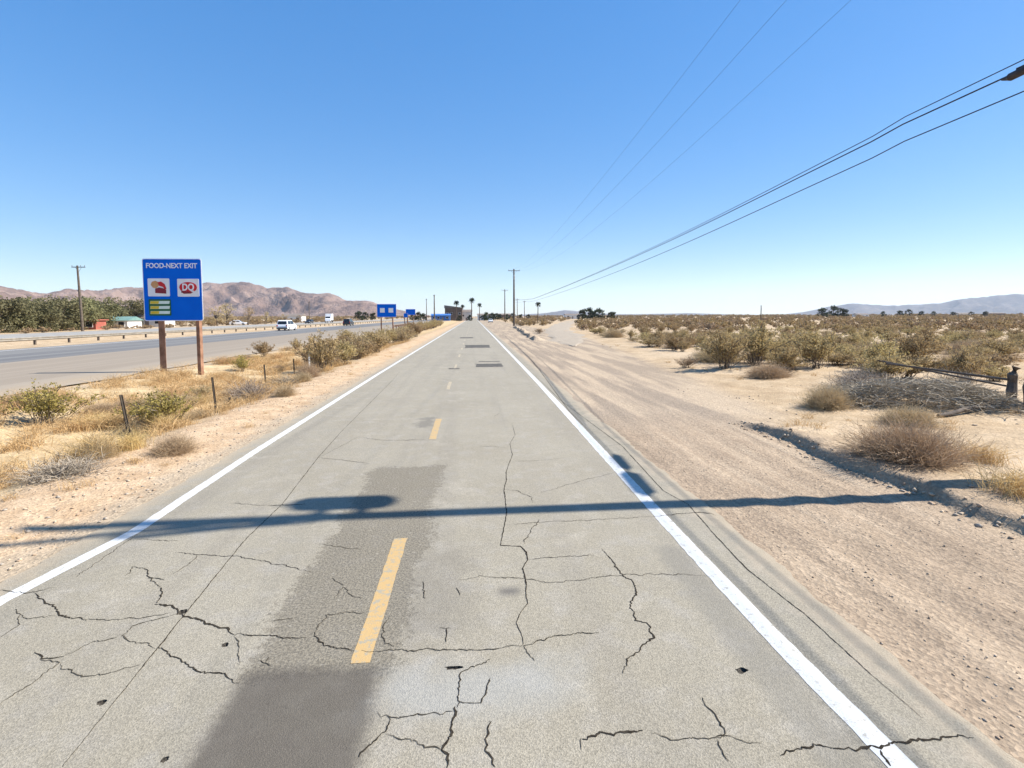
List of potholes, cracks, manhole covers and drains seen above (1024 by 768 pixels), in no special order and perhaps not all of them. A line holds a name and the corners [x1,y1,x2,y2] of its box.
crack [147,539,298,571]
crack [359,428,712,768]
crack [580,697,759,761]
crack [781,734,974,766]
crack [0,566,364,704]
